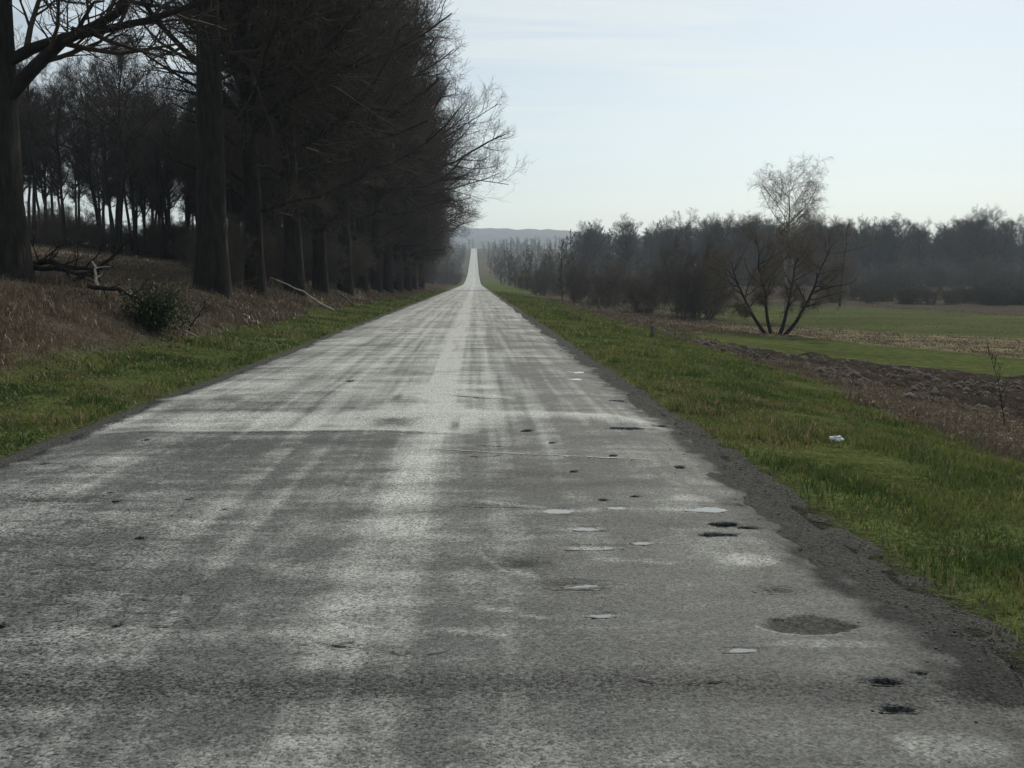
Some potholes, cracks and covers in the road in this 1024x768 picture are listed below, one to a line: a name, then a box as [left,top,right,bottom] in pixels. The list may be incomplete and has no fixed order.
crack [151,431,666,462]
pothole [857,678,911,687]
pothole [871,705,923,714]
pothole [751,614,868,636]
crack [611,672,739,685]
